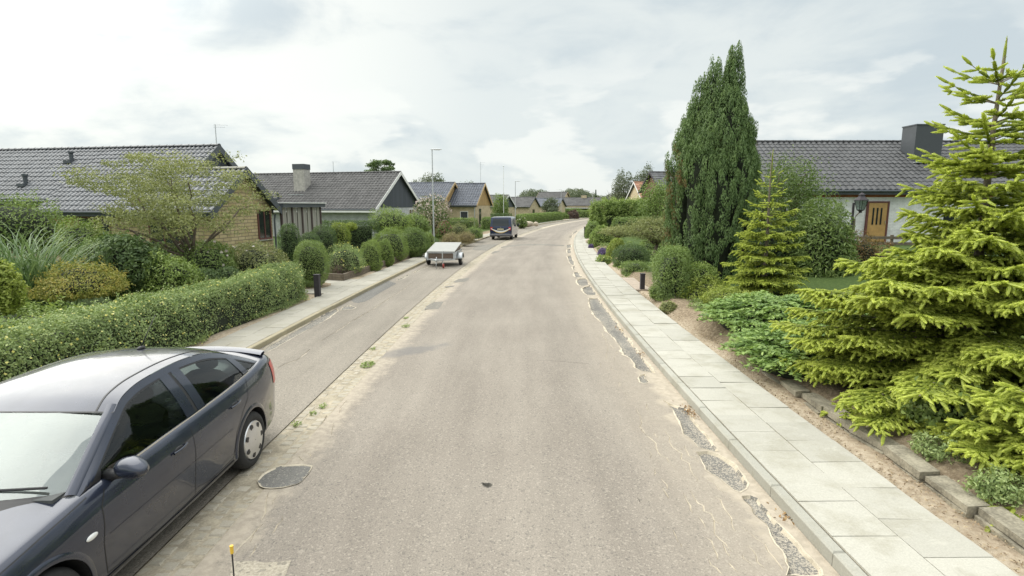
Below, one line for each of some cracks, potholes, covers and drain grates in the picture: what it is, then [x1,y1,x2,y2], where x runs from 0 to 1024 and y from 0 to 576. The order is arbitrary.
pothole [581,285,597,295]
pothole [696,451,750,493]
pothole [663,400,719,451]
crack [636,405,783,575]
pothole [742,495,824,576]
pothole [588,298,655,373]
